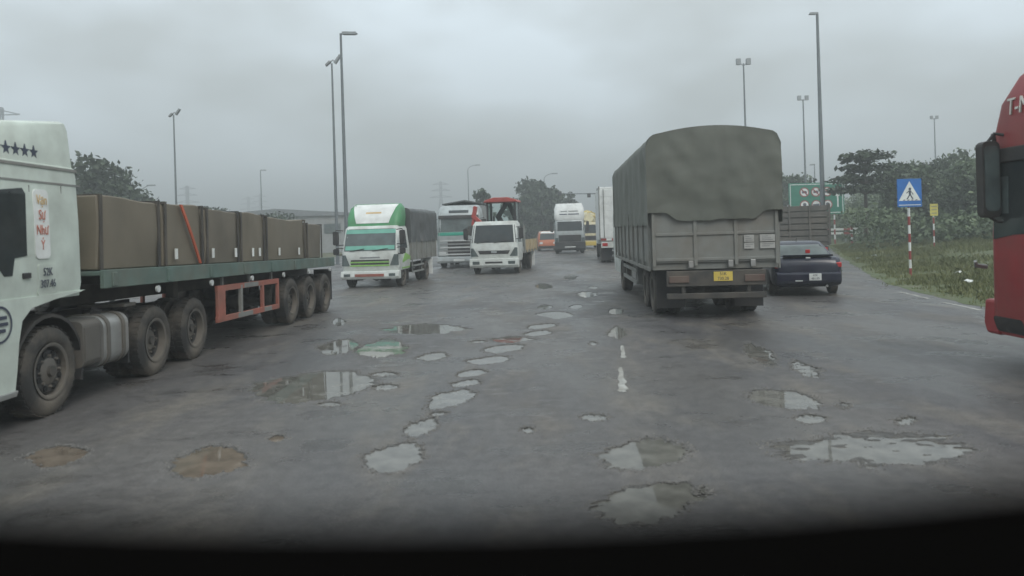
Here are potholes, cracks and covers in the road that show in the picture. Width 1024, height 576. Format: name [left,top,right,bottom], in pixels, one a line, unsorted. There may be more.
pothole [574,412,614,422]
pothole [480,343,526,355]
pothole [313,338,364,358]
pothole [787,358,828,380]
pothole [447,377,485,388]
pothole [238,368,391,406]
pothole [736,387,832,411]
pothole [887,415,923,427]
pothole [745,426,1002,471]
pothole [421,386,480,412]
pothole [378,323,474,335]
pothole [158,442,257,481]
